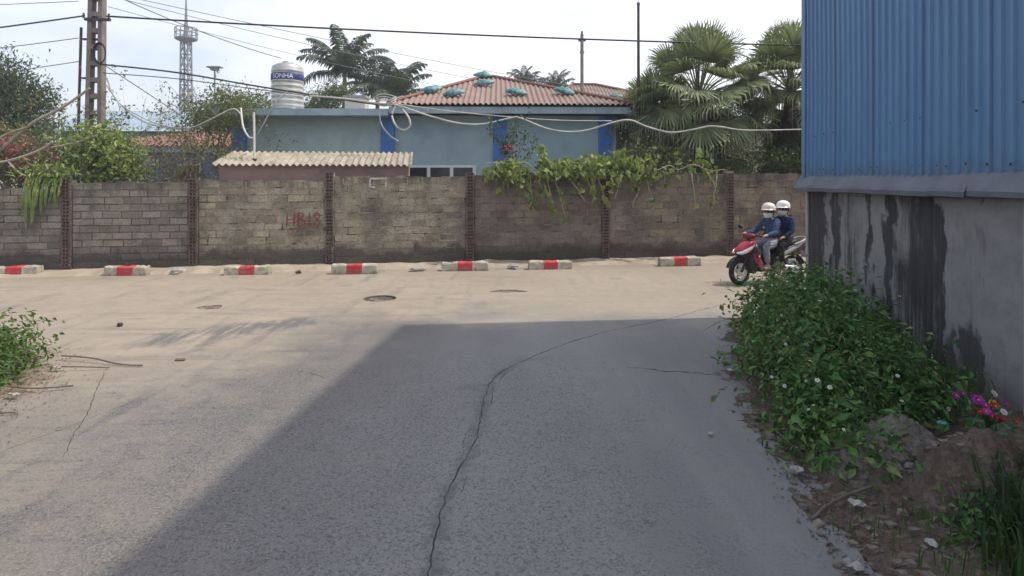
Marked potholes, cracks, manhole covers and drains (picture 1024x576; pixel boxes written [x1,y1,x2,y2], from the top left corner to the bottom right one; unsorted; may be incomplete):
crack [0,368,136,458]
crack [427,304,736,576]
